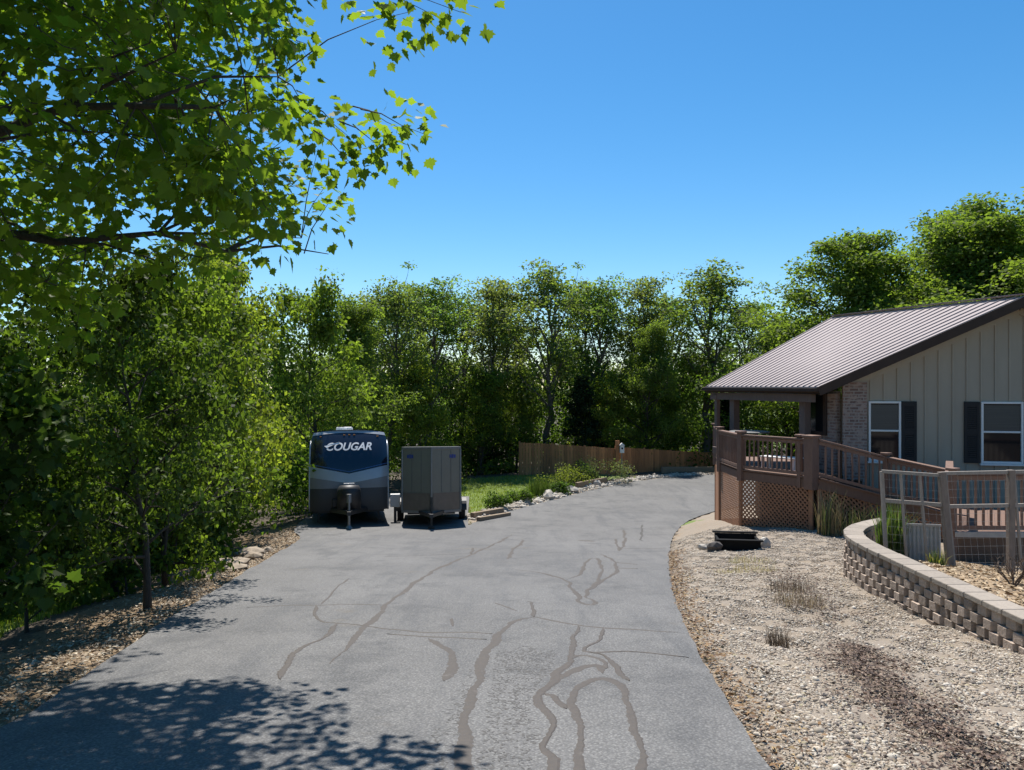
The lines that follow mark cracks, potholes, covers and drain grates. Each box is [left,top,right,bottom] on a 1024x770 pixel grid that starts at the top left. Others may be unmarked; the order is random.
crack [416,646,556,770]
